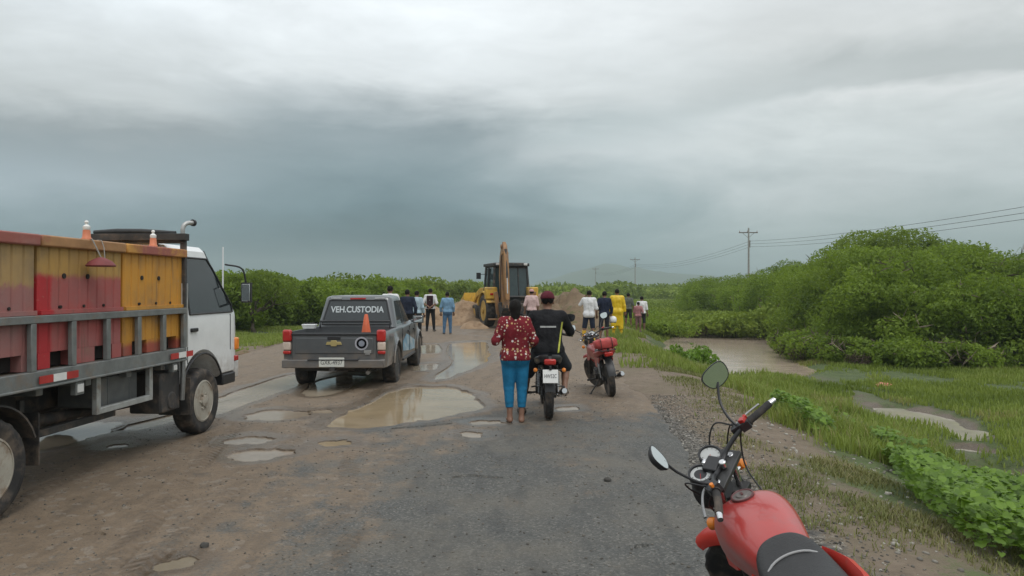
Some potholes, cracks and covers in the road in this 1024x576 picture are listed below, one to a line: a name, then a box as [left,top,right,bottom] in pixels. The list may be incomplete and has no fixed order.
pothole [430,341,491,381]
pothole [317,439,352,447]
pothole [224,448,296,462]
pothole [40,419,127,450]
pothole [321,385,487,429]
pothole [223,436,278,445]
pothole [151,555,200,571]
